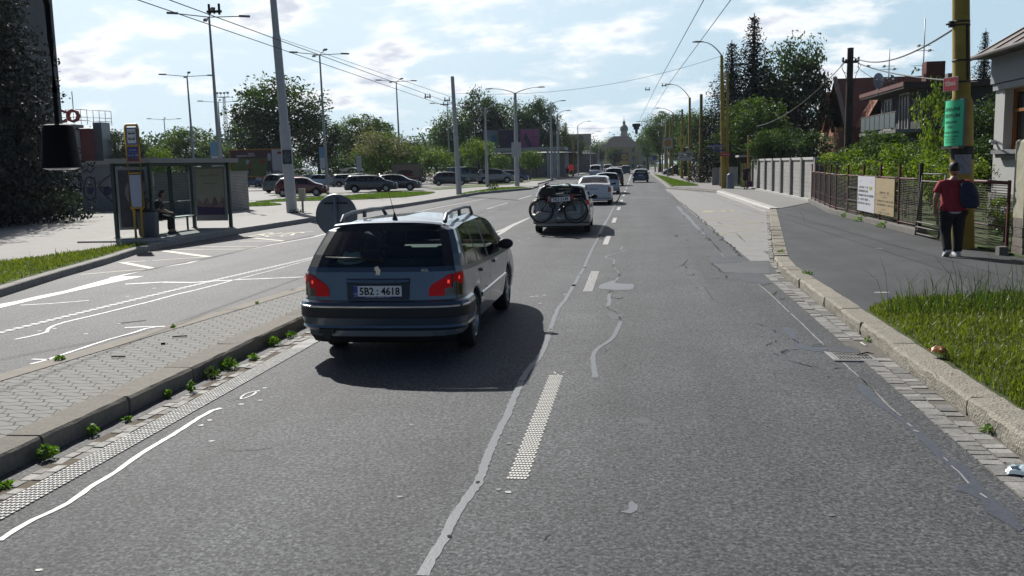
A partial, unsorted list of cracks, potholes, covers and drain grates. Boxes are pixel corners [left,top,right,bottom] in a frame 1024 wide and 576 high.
drain grate [824,351,879,362]
